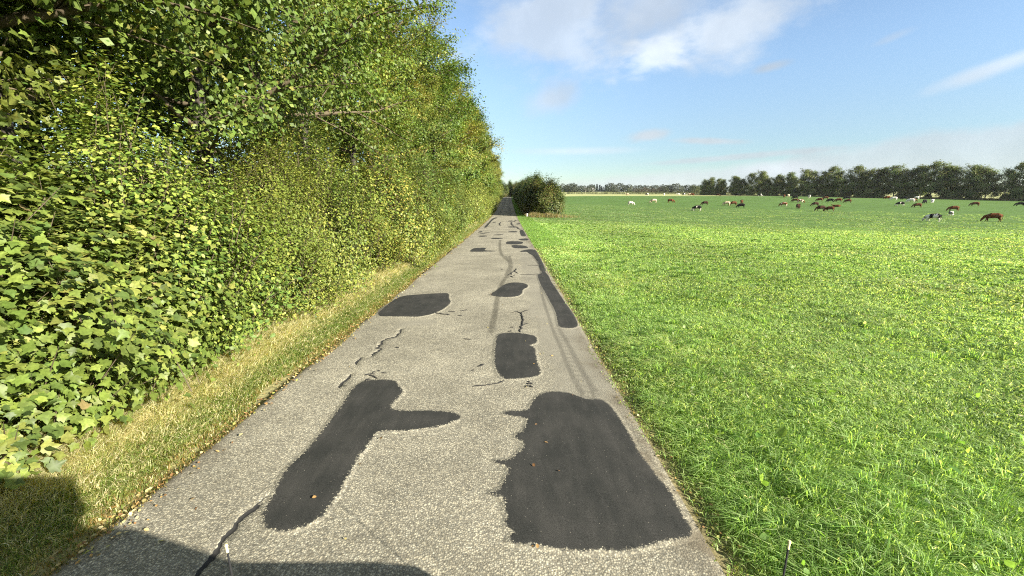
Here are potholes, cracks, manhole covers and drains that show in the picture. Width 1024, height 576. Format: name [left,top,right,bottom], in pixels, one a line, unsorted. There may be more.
crack [180,482,274,576]
crack [330,327,407,393]
crack [509,310,528,332]
